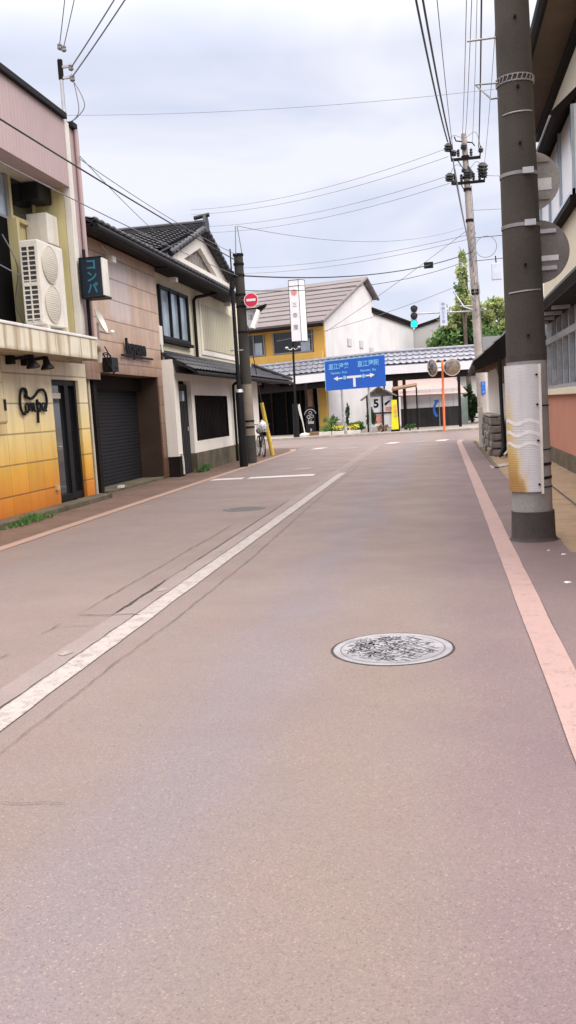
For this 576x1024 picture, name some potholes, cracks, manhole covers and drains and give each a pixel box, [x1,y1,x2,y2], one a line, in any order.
manhole cover [331,633,456,666]
